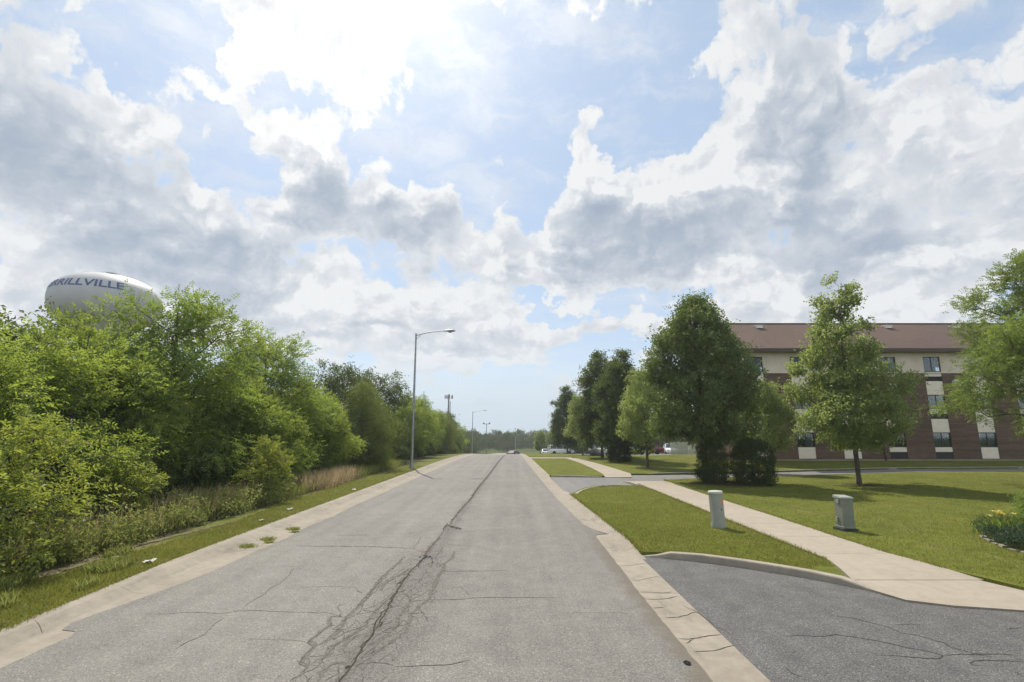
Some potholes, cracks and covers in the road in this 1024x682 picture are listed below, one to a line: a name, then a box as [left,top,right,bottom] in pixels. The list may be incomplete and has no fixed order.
crack [792,615,1021,675]
crack [171,455,560,682]
crack [623,563,734,652]
